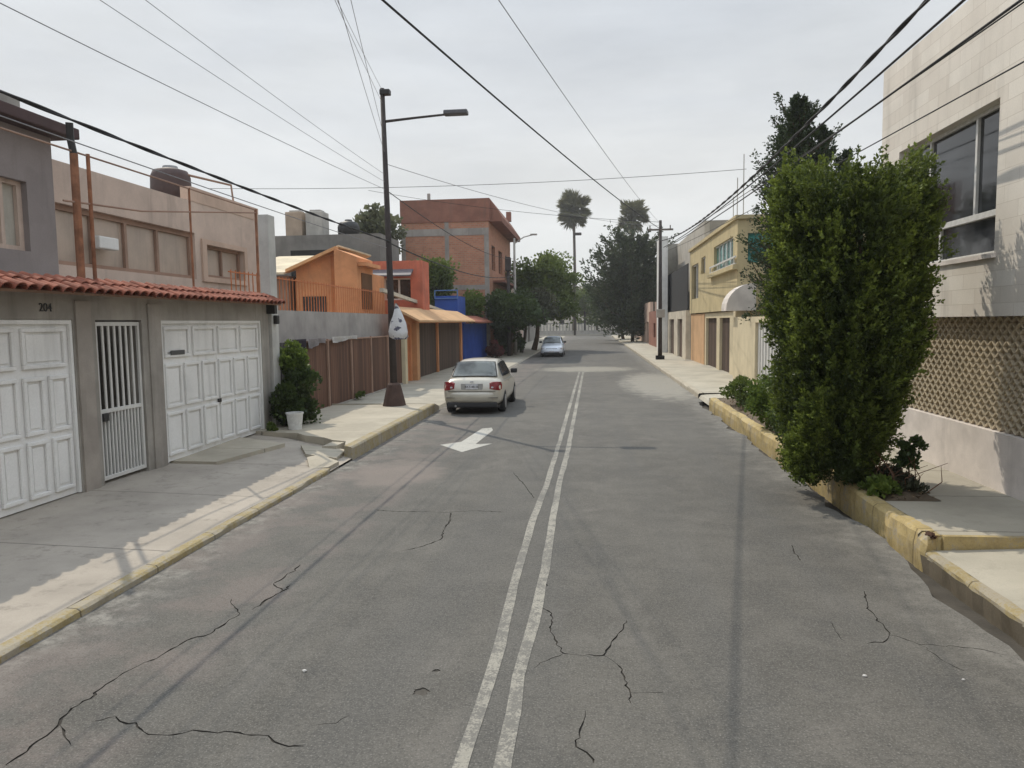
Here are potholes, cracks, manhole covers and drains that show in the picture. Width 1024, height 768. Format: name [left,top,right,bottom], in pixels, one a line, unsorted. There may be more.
crack [382,510,495,551]
crack [575,711,594,763]
crack [6,565,301,765]
crack [536,584,661,703]
crack [864,591,995,671]
